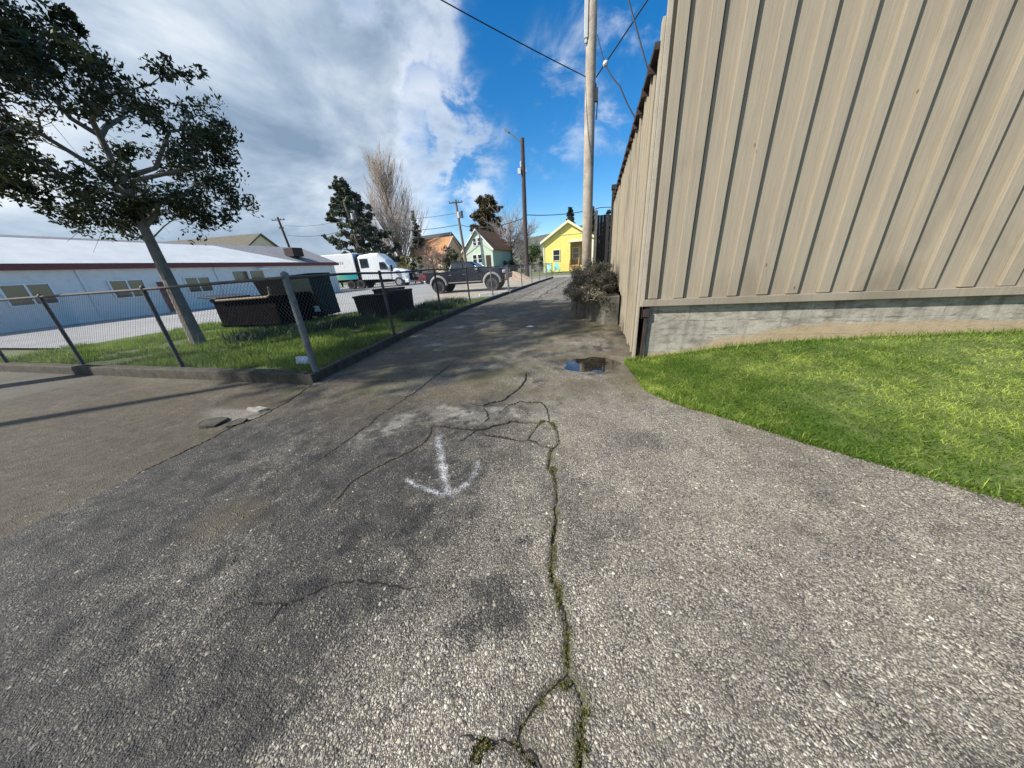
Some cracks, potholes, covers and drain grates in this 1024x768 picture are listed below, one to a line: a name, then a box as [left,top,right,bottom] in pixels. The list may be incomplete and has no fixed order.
crack [440,373,591,768]
crack [227,579,418,626]
crack [331,427,432,505]
